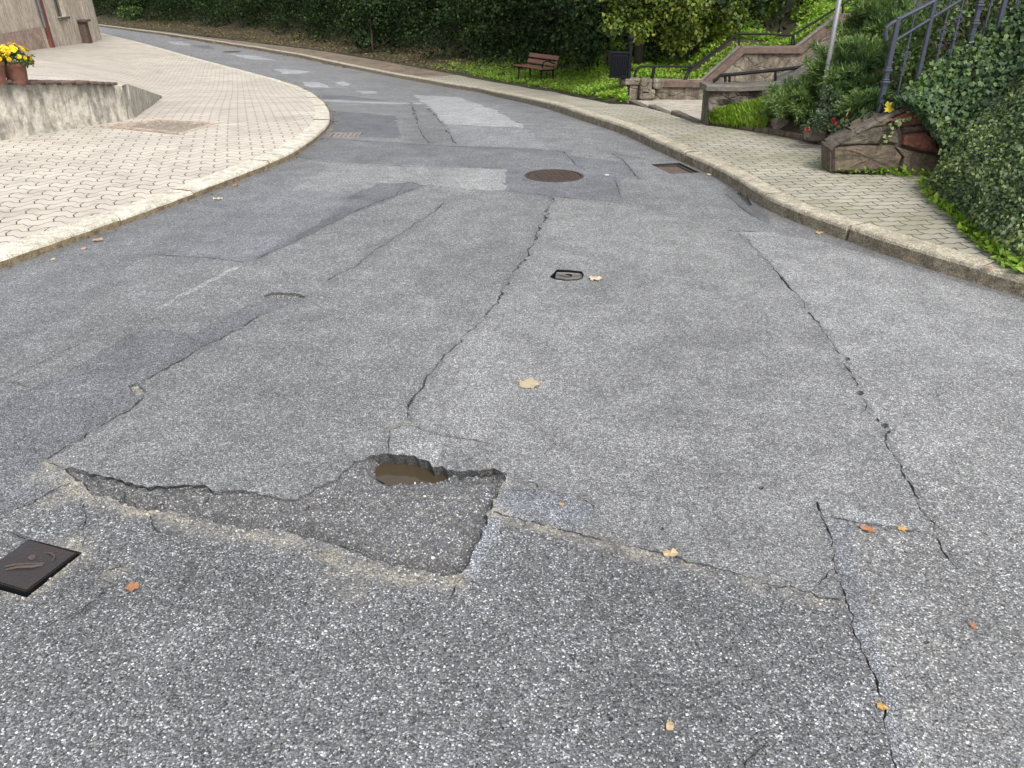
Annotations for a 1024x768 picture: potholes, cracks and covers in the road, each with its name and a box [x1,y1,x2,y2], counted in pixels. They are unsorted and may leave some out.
crack [327,203,444,281]
utility cover [100,119,219,135]
crack [388,198,555,450]
crack [494,502,927,768]
pothole [264,292,305,305]
manhole cover [0,539,82,597]
manhole cover [524,169,584,182]
pothole [63,453,506,576]
utility cover [550,269,584,281]
drain grate [651,163,698,174]
